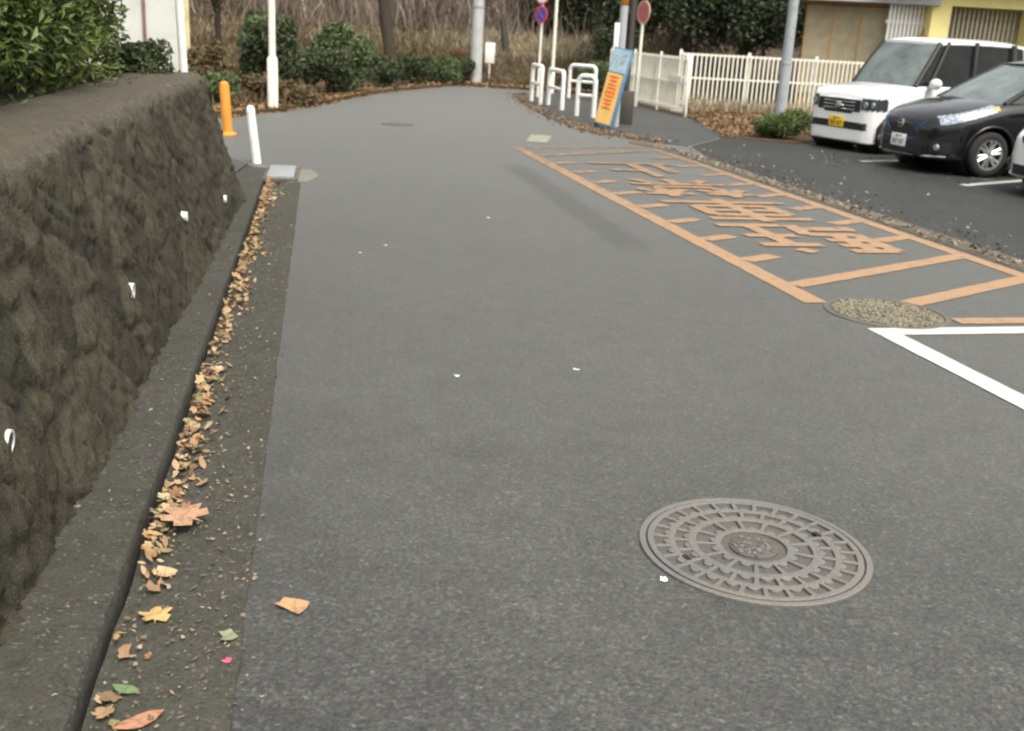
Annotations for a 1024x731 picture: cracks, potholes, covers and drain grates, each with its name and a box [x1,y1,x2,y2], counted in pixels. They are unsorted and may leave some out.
manhole cover [639,498,873,608]
manhole cover [823,297,951,329]
